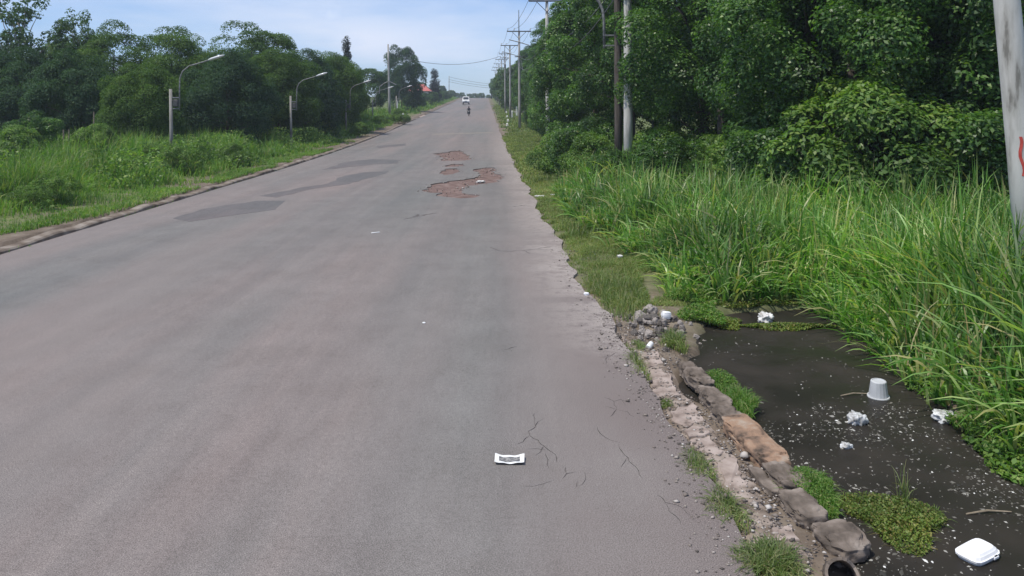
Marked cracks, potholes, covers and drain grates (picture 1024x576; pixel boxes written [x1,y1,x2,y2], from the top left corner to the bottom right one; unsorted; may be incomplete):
pothole [422,168,503,198]
crack [597,398,640,475]
crack [518,415,586,487]
pothole [436,150,471,161]
